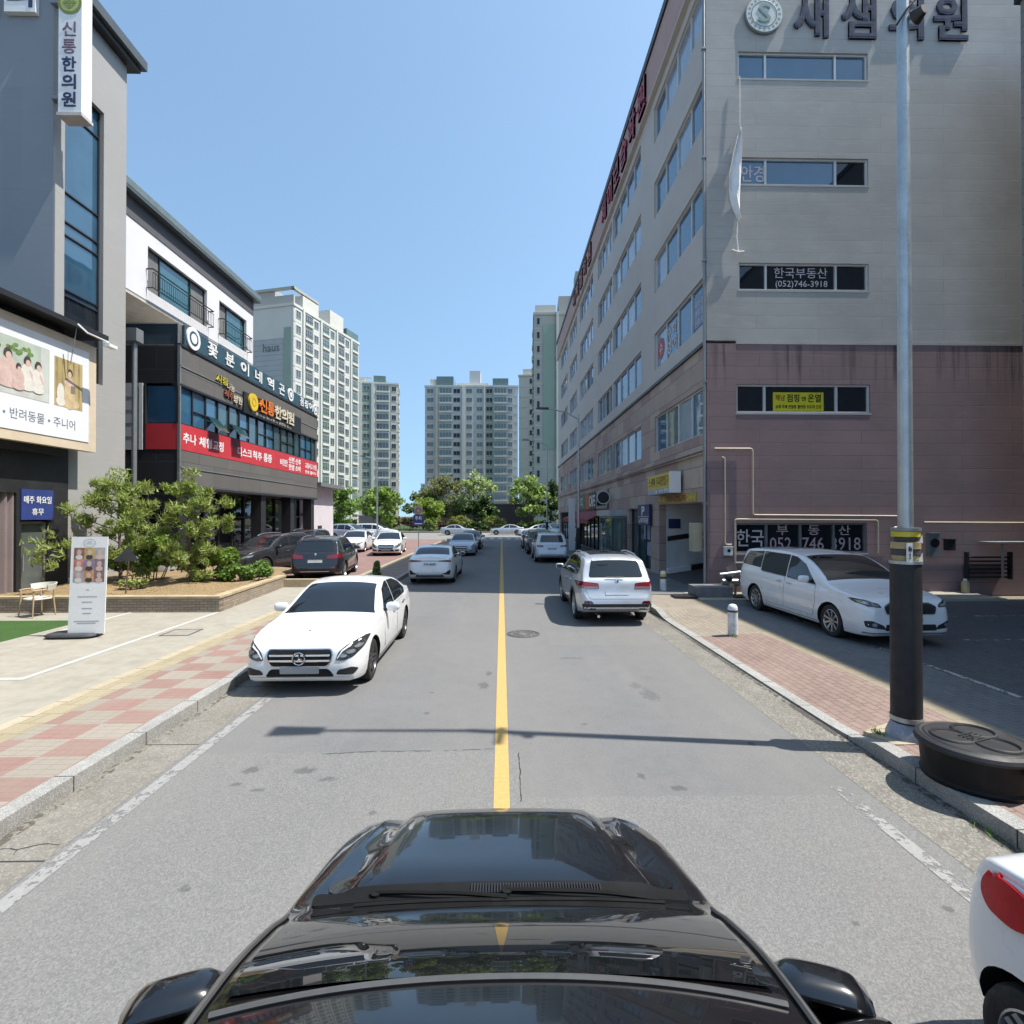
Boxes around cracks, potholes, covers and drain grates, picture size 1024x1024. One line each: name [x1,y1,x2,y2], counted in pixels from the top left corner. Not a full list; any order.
manhole cover [507,630,540,638]
